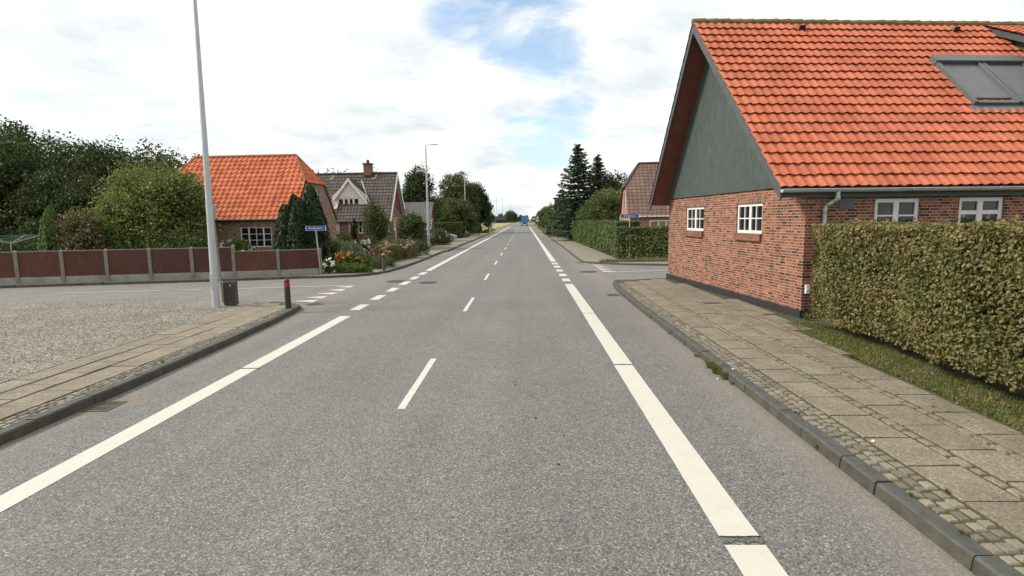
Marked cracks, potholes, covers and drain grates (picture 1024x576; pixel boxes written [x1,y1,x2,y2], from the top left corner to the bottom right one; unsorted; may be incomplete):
drain grate [75,396,148,416]
